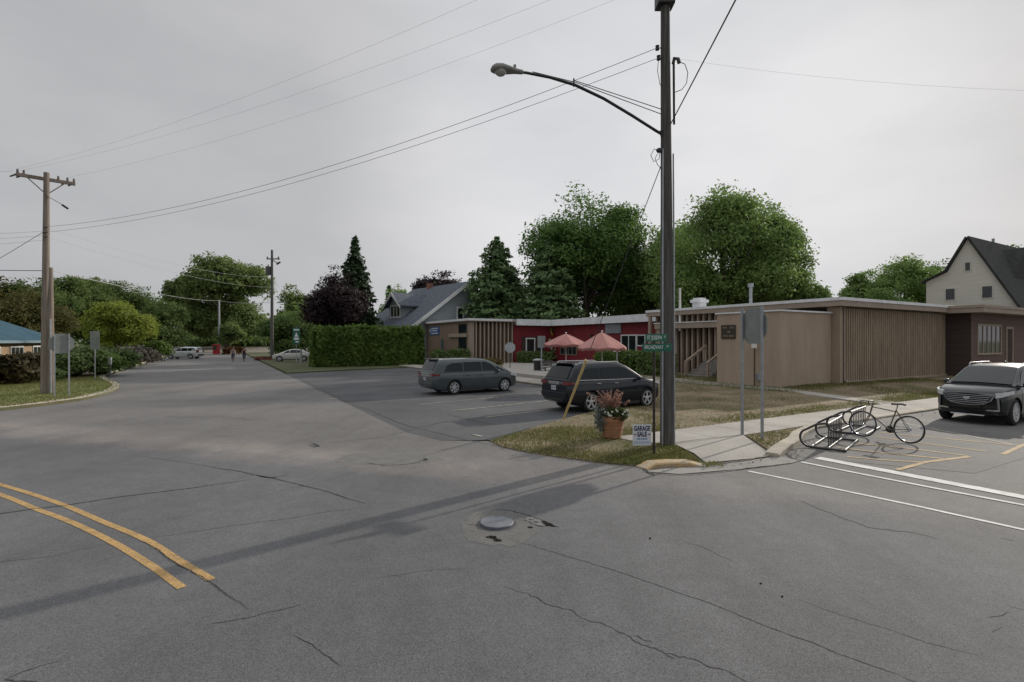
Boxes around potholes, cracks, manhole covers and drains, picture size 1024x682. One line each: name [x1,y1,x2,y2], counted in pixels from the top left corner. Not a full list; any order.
crack [508,587,746,682]
manhole cover [477,516,517,531]
